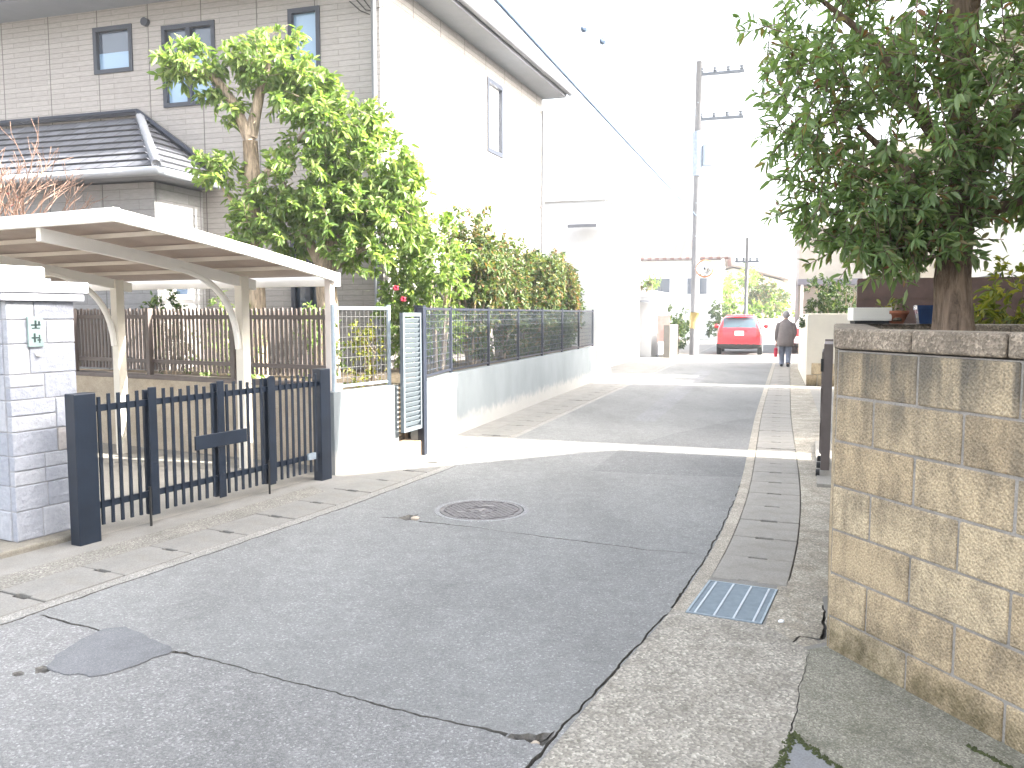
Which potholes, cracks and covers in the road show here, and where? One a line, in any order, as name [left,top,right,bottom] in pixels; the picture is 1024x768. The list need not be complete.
crack [171,651,508,736]
manhole cover [434,499,529,522]
drain grate [685,580,778,625]
crack [386,485,740,768]
crack [790,605,827,731]
